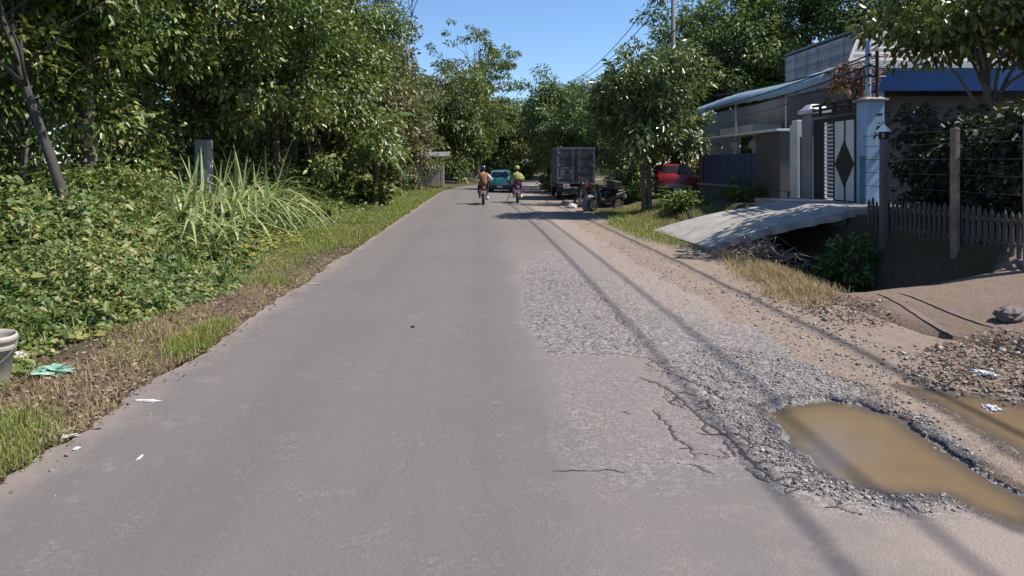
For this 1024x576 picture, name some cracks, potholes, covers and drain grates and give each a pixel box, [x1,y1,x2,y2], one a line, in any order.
crack [638,360,864,515]
pothole [768,398,1024,525]
